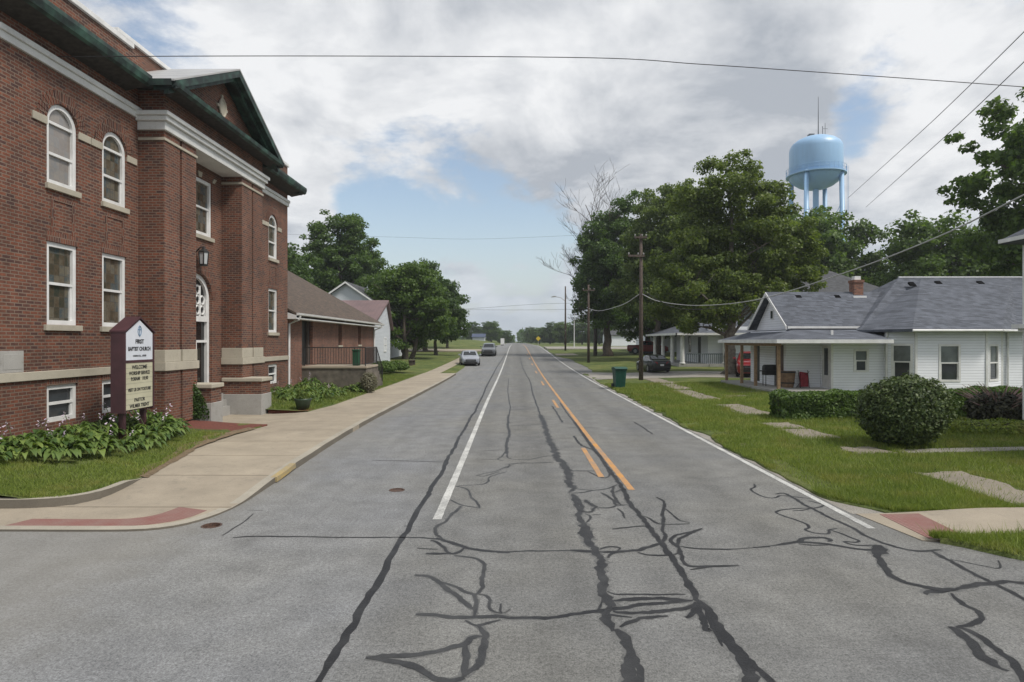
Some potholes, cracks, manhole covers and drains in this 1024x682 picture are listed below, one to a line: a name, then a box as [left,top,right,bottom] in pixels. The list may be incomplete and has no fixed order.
crack [433,379,563,539]
crack [221,510,260,536]
